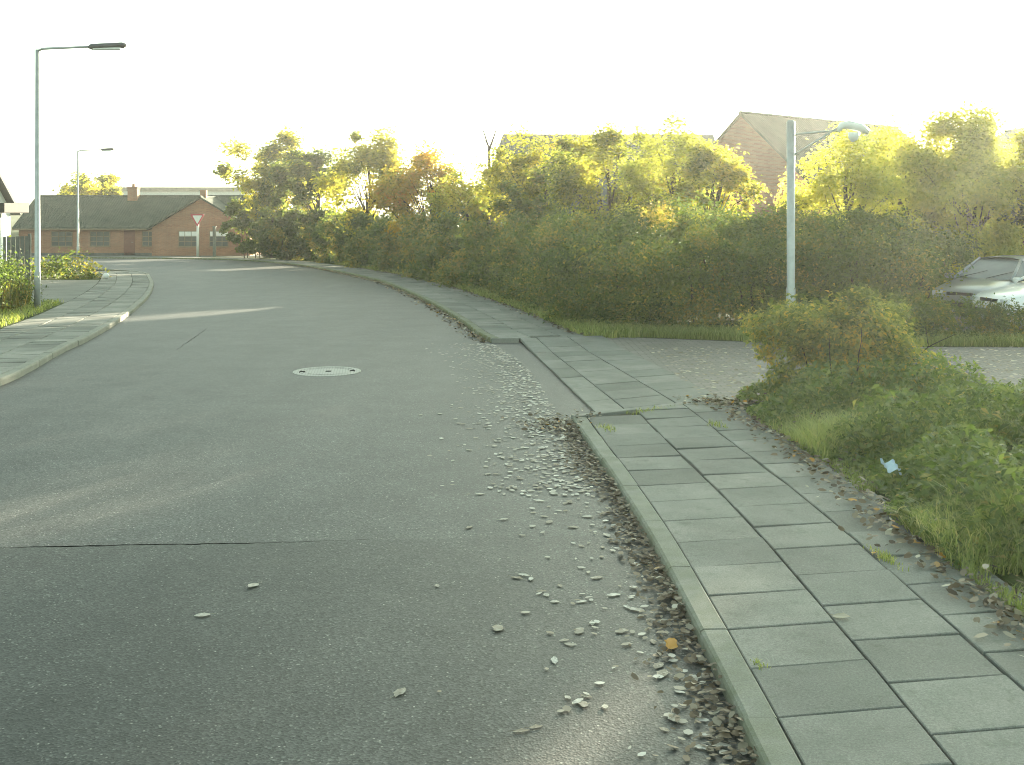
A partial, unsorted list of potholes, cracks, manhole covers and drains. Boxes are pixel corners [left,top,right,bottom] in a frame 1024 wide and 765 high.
manhole cover [292,366,361,377]
crack [17,540,340,548]
